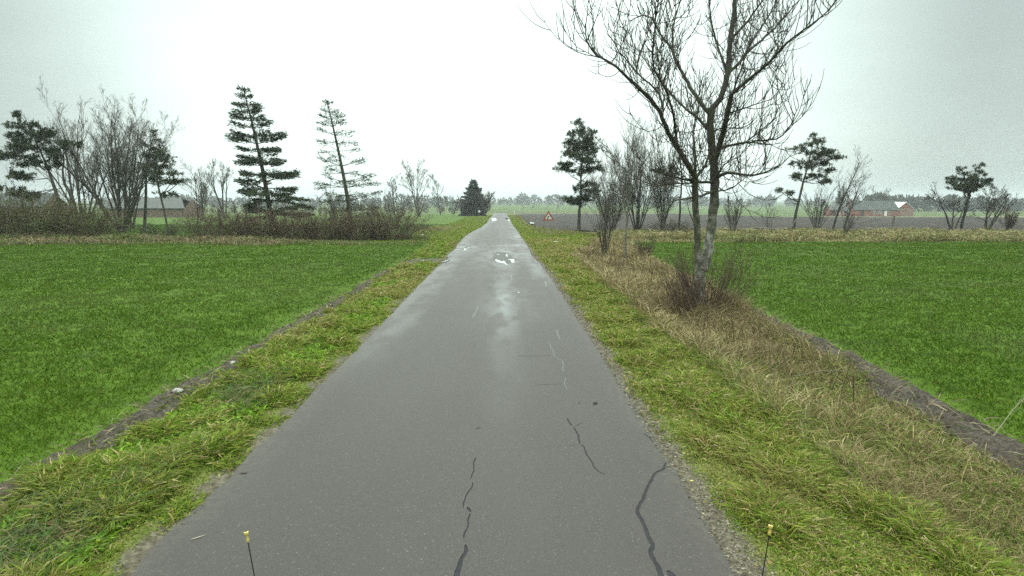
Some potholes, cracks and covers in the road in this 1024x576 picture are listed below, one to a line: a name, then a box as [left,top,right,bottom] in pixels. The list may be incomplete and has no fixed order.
crack [567,418,607,474]
crack [518,330,567,389]
crack [454,457,476,576]
